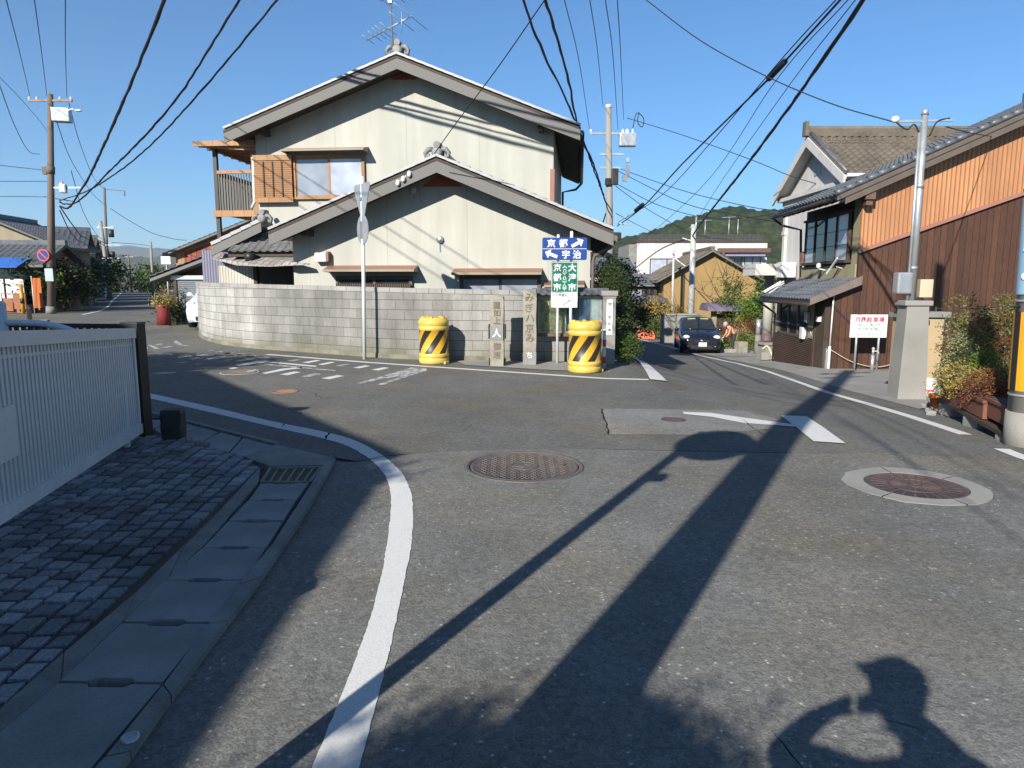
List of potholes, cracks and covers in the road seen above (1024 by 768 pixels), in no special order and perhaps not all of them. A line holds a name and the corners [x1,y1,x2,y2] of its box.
manhole cover [841,467,994,506]
drain grate [260,466,322,486]
manhole cover [465,451,584,483]
